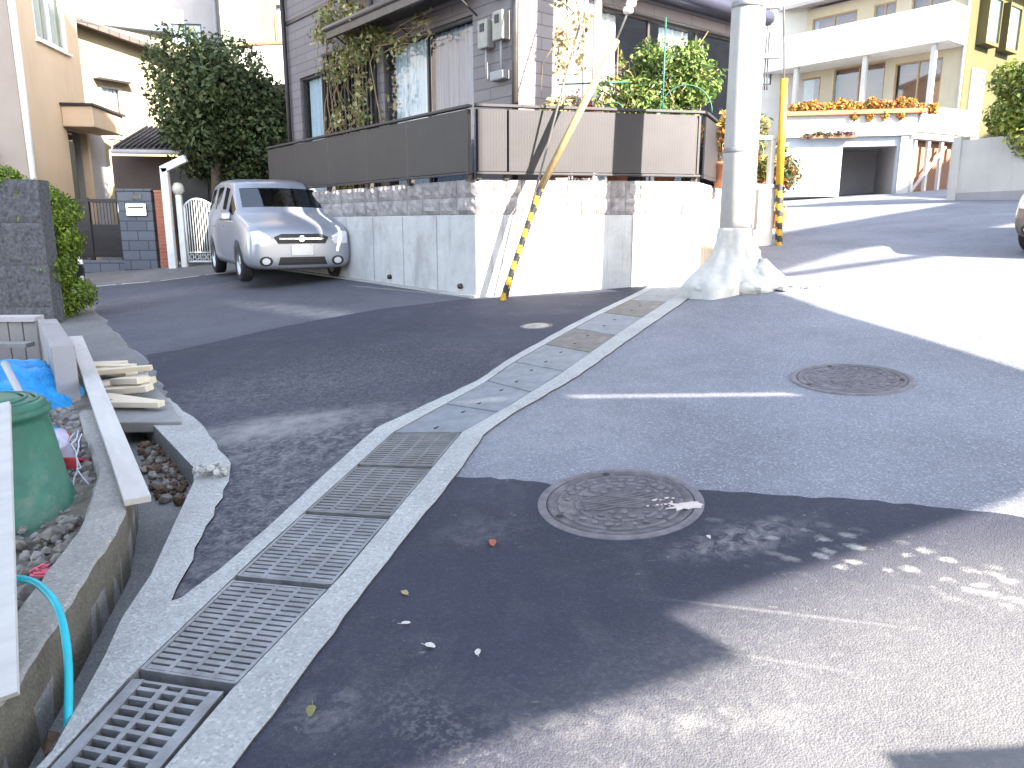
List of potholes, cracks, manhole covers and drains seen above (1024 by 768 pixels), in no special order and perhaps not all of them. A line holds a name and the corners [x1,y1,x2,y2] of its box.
drain grate [51,679,224,768]
manhole cover [790,363,916,396]
drain grate [140,580,327,695]
utility cover [520,322,553,330]
drain grate [237,514,388,590]
drain grate [307,466,430,519]
manhole cover [538,469,705,540]
drain grate [359,433,461,469]
